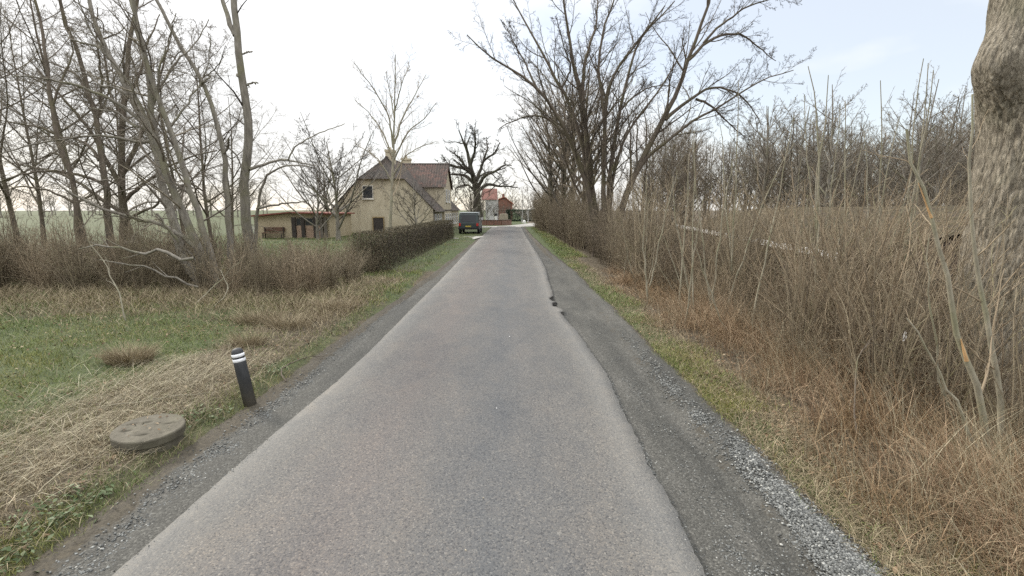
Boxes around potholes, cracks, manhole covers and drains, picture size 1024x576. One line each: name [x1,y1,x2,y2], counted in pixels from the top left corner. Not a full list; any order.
manhole cover [110,413,186,454]
